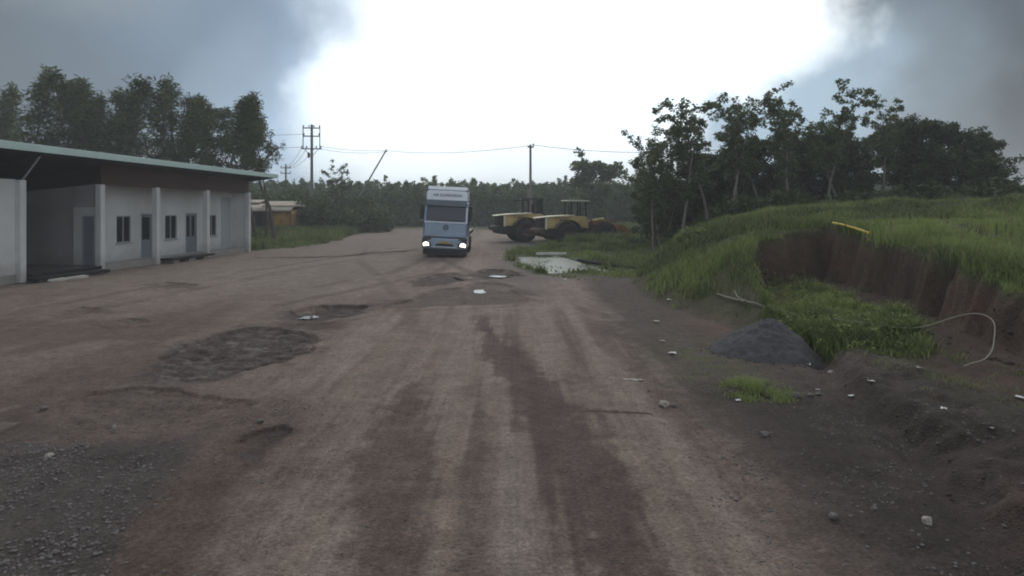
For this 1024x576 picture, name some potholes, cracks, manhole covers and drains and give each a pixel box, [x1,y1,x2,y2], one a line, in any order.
pothole [454,268,536,282]
pothole [218,421,308,468]
crack [254,249,423,260]
pothole [139,326,328,386]
pothole [396,271,485,289]
pothole [265,303,383,325]
crack [586,409,655,418]
pothole [132,281,213,290]
